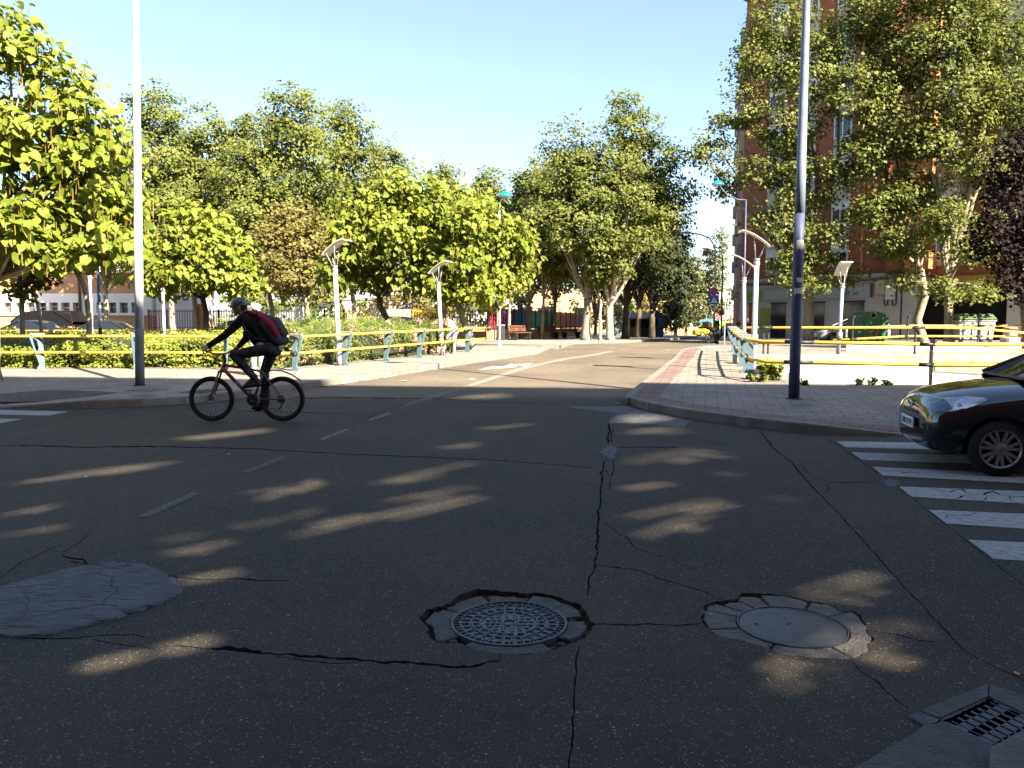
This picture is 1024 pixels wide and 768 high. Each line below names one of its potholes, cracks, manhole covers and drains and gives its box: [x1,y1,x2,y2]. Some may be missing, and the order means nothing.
drain grate [908,684,1024,745]
crack [761,432,1024,680]
manhole cover [451,601,567,647]
manhole cover [737,606,850,649]
crack [574,423,718,603]
crack [12,421,599,469]
crack [567,645,580,768]
crack [0,532,94,577]
crack [20,626,501,668]
